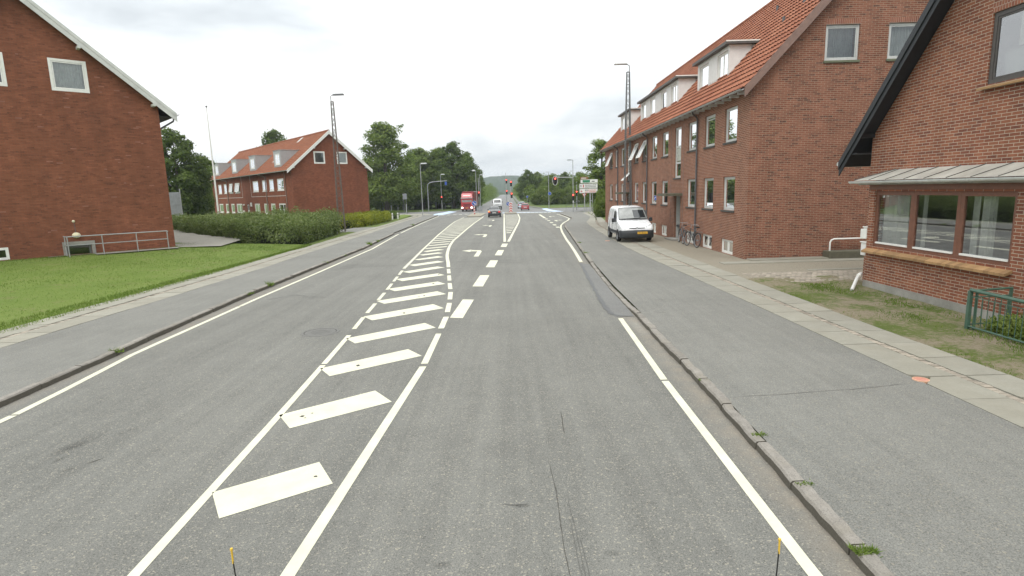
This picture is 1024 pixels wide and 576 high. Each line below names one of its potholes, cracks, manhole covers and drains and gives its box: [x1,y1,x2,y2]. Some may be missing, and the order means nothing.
manhole cover [301,328,340,337]
crack [548,460,590,576]
